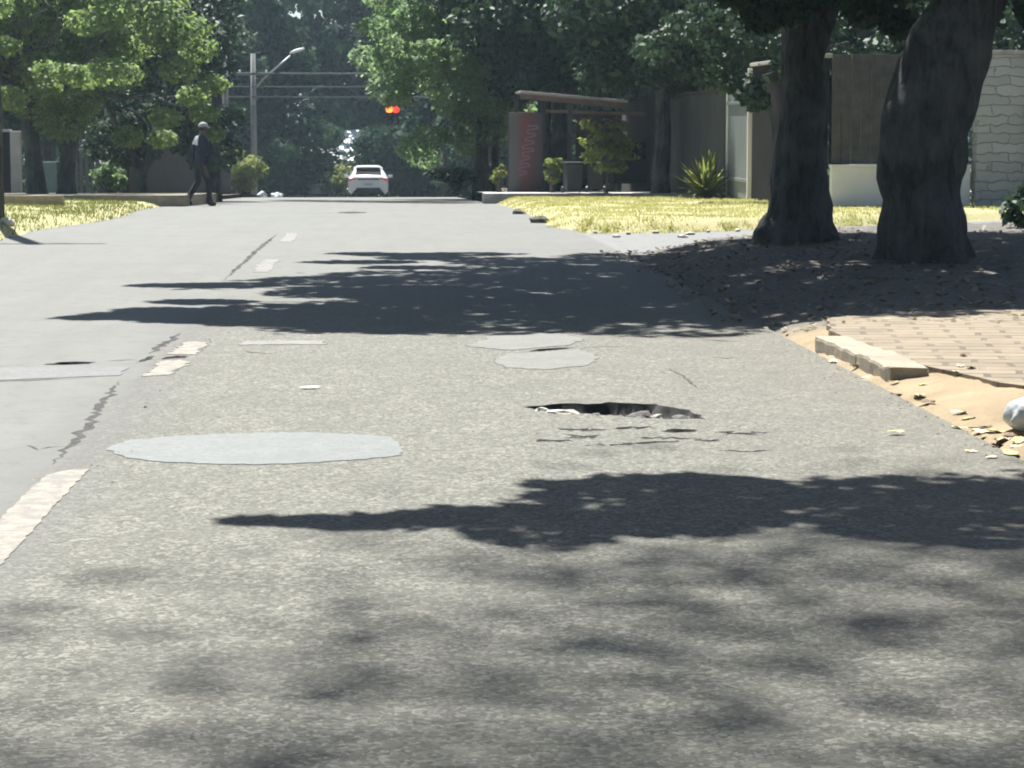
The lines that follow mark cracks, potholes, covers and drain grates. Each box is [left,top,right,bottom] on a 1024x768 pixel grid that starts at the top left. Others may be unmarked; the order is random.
crack [536,426,768,452]
pothole [526,402,705,419]
crack [665,340,739,390]
crack [223,234,277,281]
crack [0,365,120,465]
